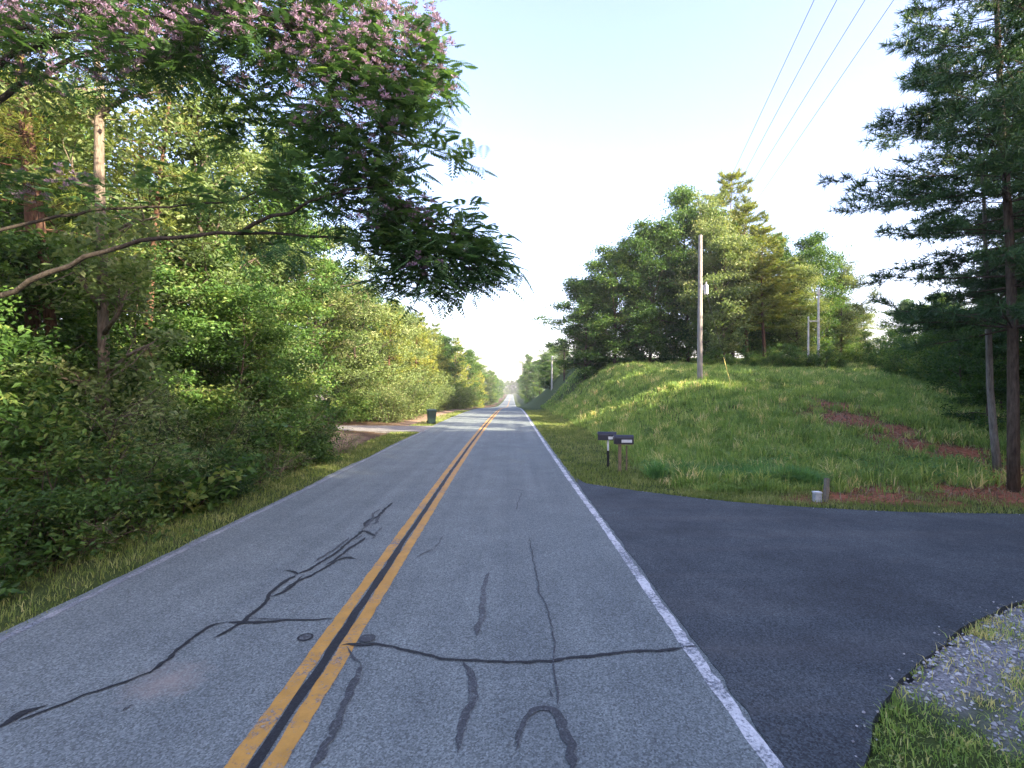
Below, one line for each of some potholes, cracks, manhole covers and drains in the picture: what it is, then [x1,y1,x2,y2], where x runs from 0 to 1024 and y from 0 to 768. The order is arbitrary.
crack [0,503,392,727]
crack [343,538,695,768]
